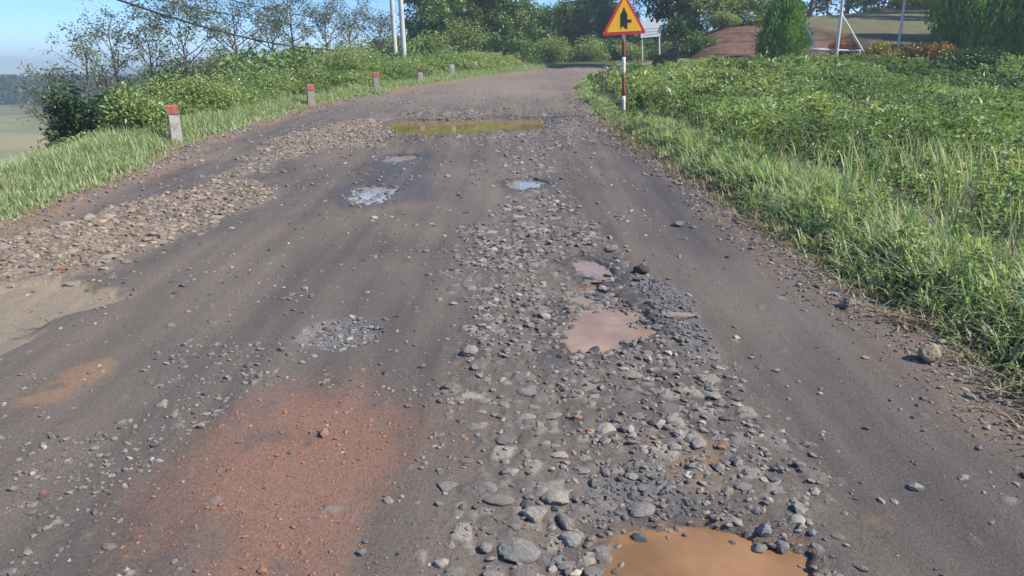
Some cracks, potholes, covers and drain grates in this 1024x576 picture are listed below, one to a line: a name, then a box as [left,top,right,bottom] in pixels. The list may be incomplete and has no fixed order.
pothole [501,177,550,190]
pothole [379,153,423,163]
pothole [562,255,620,283]
pothole [287,314,390,355]
pothole [378,116,552,136]
pothole [551,281,666,356]
pothole [341,184,403,206]
pothole [588,512,826,576]
